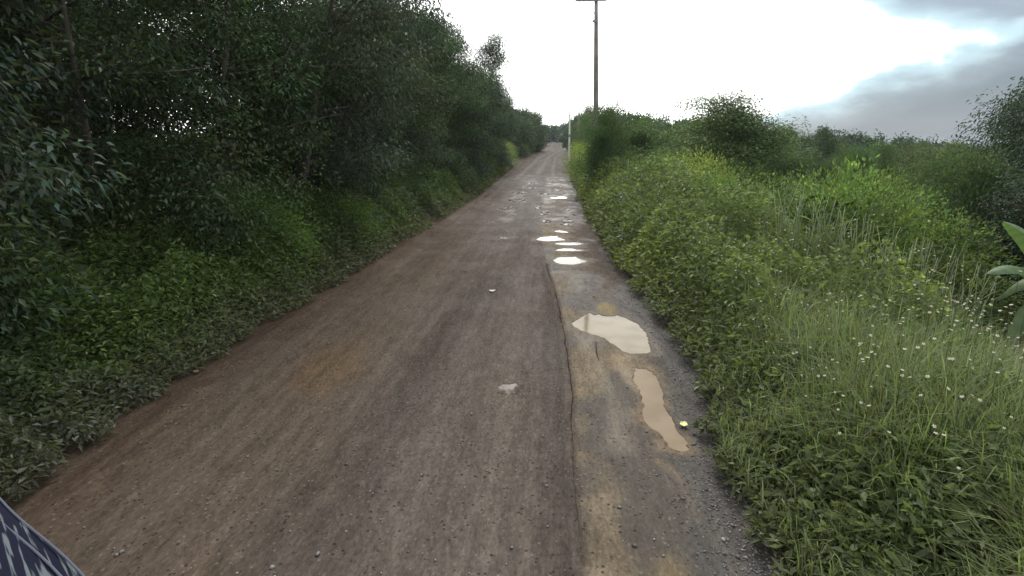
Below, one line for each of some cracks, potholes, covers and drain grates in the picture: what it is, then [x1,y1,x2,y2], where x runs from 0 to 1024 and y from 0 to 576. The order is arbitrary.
crack [541,263,607,569]
pothole [624,364,701,458]
pothole [561,311,660,357]
pothole [545,255,598,266]
pothole [528,235,575,243]
